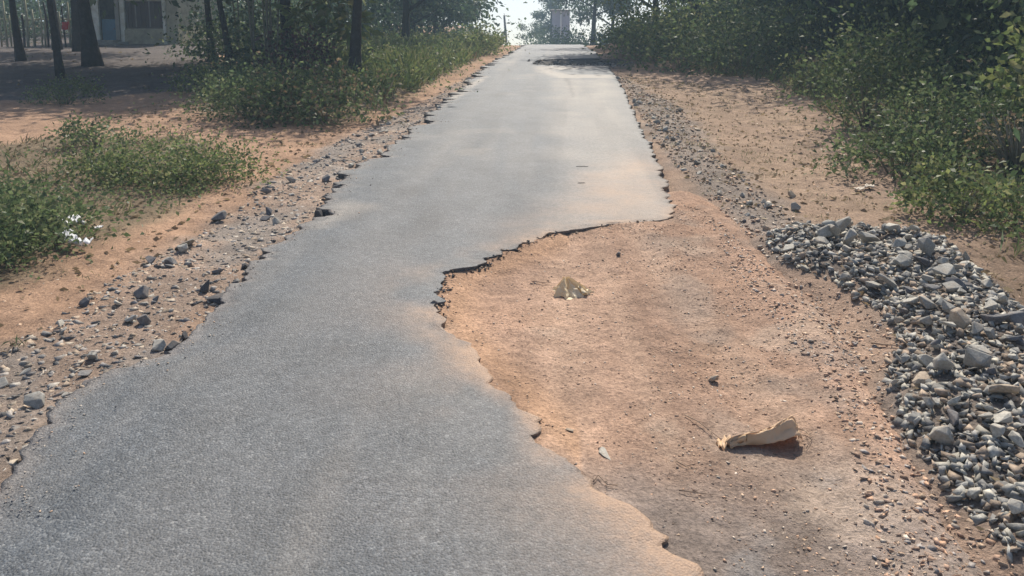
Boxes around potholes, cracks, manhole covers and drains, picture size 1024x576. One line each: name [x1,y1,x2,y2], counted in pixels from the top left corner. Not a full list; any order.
pothole [434,191,985,576]
